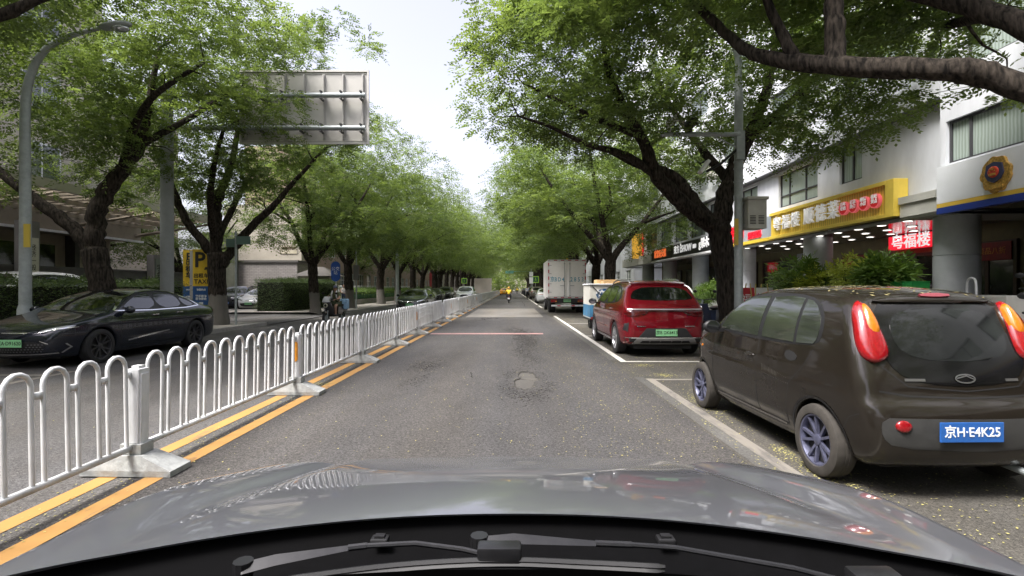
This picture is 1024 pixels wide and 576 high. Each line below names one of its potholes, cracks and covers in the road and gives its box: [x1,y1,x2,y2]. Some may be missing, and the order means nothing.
pothole [511,370,542,391]
